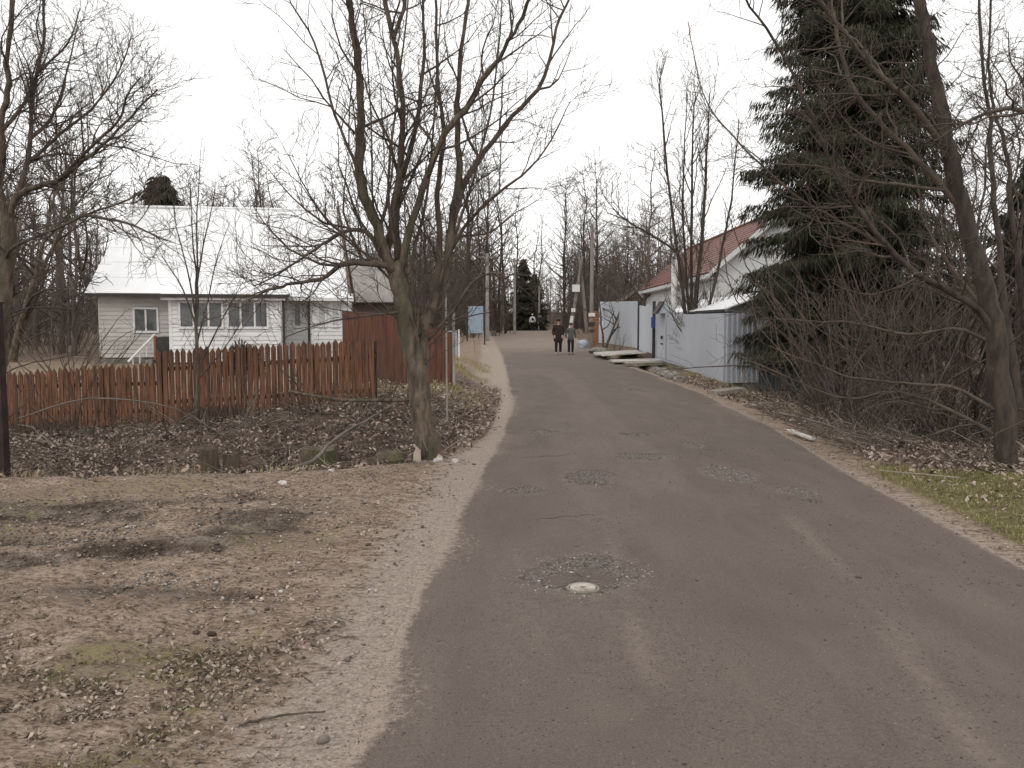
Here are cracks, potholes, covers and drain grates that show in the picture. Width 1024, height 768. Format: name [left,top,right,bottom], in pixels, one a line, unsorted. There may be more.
manhole cover [566,582,600,595]
